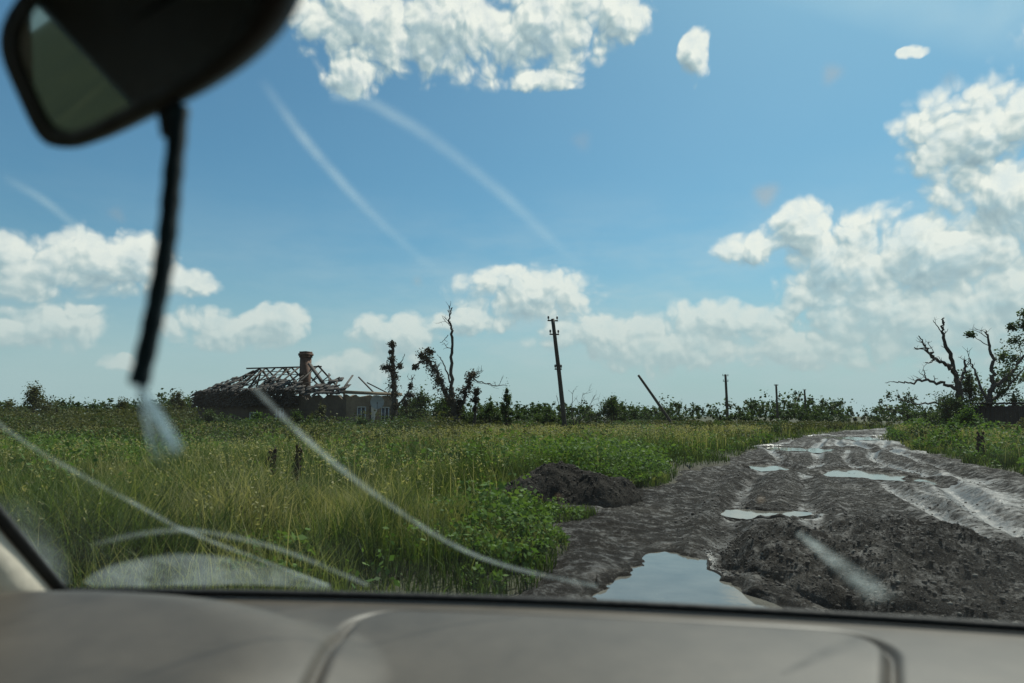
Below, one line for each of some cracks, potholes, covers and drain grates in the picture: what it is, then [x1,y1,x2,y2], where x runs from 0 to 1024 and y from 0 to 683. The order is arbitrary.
pothole [738,461,811,473]
pothole [713,506,816,522]
pothole [799,464,958,488]
pothole [580,542,820,610]
